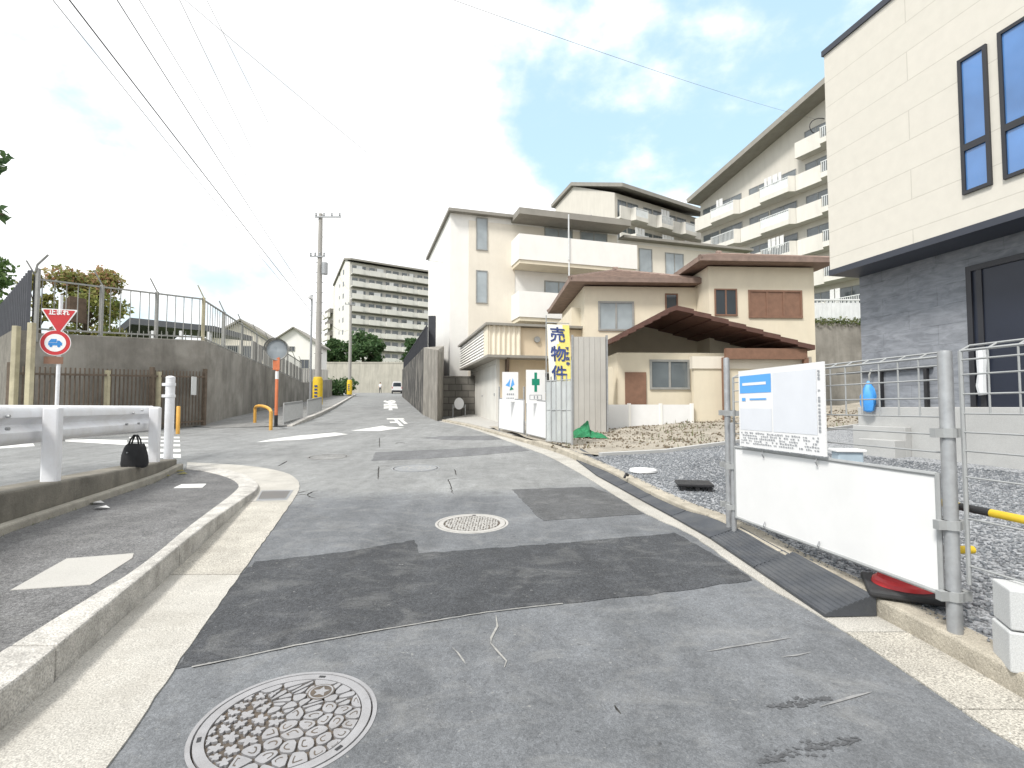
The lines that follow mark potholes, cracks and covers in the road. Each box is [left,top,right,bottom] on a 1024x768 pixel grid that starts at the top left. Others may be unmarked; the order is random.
crack [490,617,507,667]
drain grate [256,490,293,501]
manhole cover [435,514,508,534]
manhole cover [391,464,440,472]
manhole cover [184,671,377,768]
